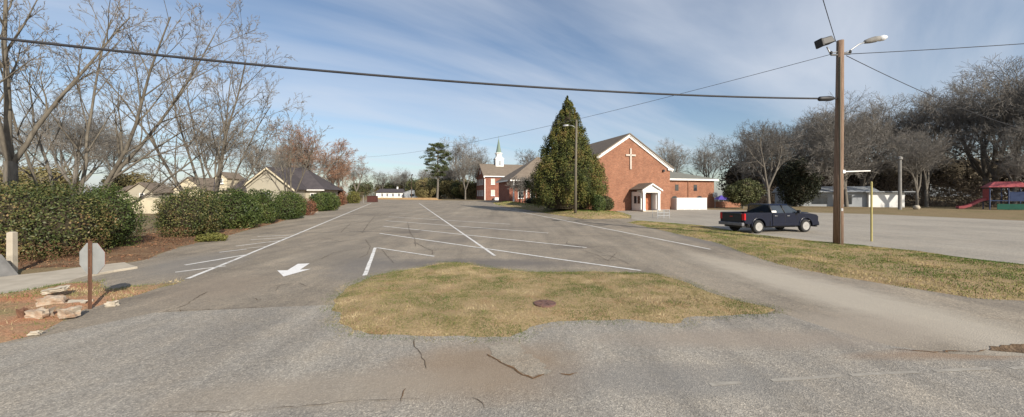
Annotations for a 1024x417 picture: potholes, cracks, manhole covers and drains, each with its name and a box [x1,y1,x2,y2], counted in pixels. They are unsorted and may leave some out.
manhole cover [534,300,556,308]
pothole [989,344,1024,353]
